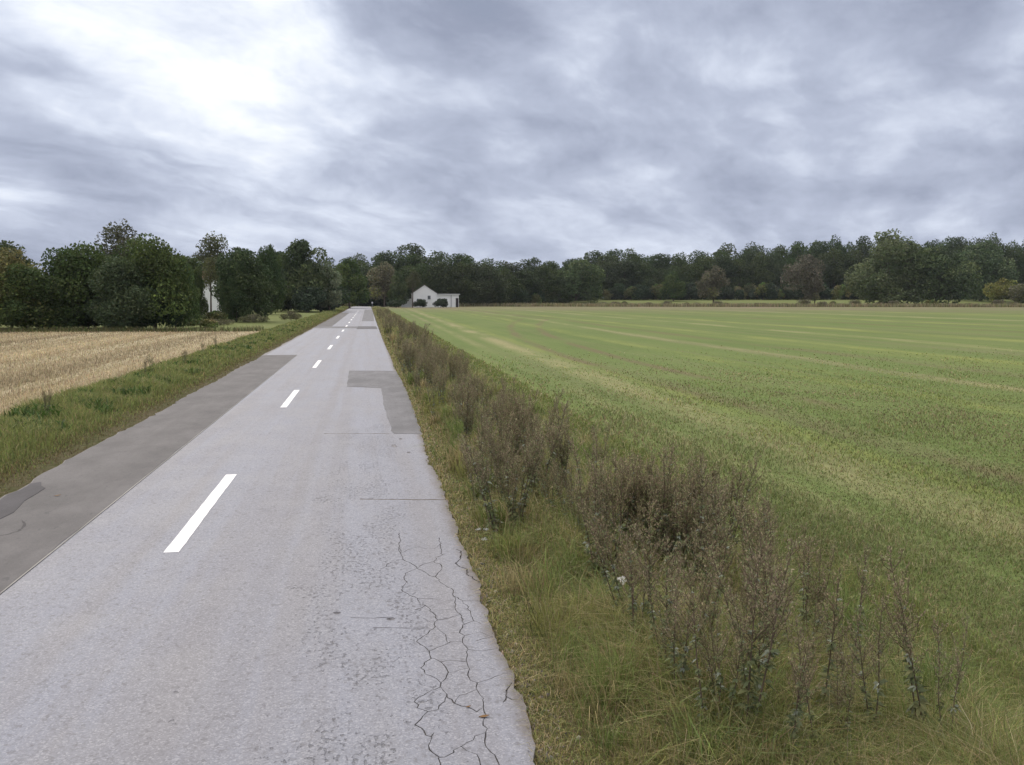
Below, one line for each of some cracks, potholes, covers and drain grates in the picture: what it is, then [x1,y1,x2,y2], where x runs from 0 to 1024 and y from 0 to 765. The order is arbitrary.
crack [384,533,500,765]
